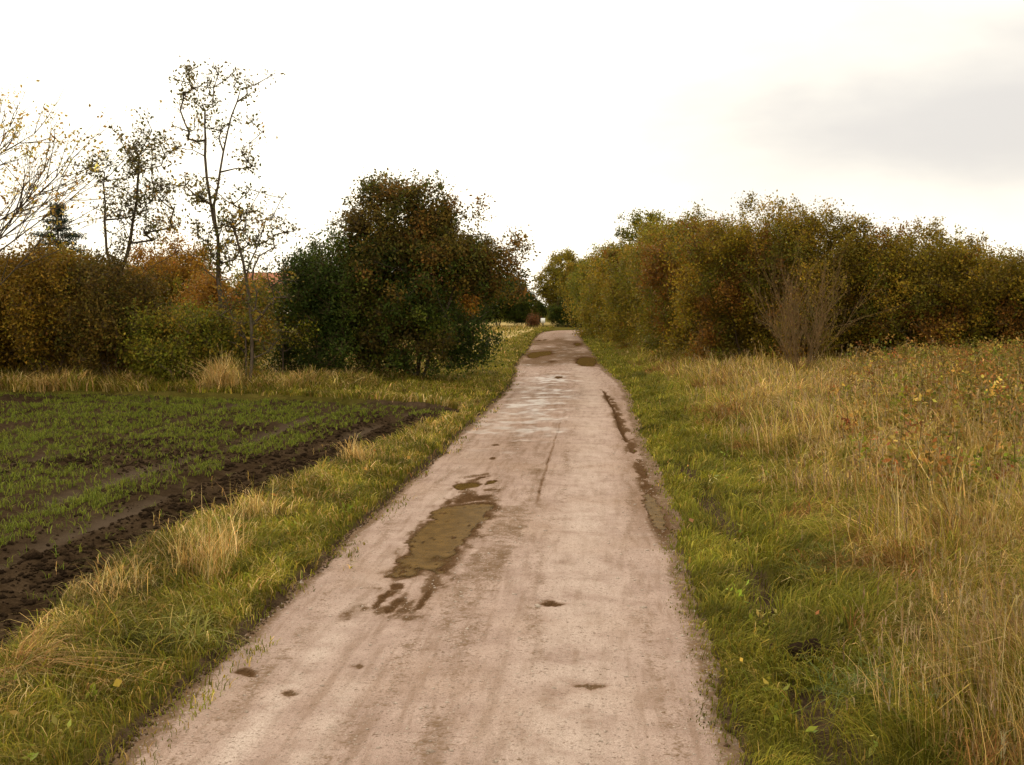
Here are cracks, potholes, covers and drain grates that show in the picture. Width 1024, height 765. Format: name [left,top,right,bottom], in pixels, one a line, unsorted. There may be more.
crack [534,419,562,504]
pothole [386,582,408,590]
pothole [379,597,407,615]
pothole [450,481,482,491]
pothole [570,681,611,692]
pothole [574,357,598,367]
pothole [381,501,500,579]
pothole [409,586,438,612]
pothole [368,589,400,610]
pothole [533,599,572,608]
